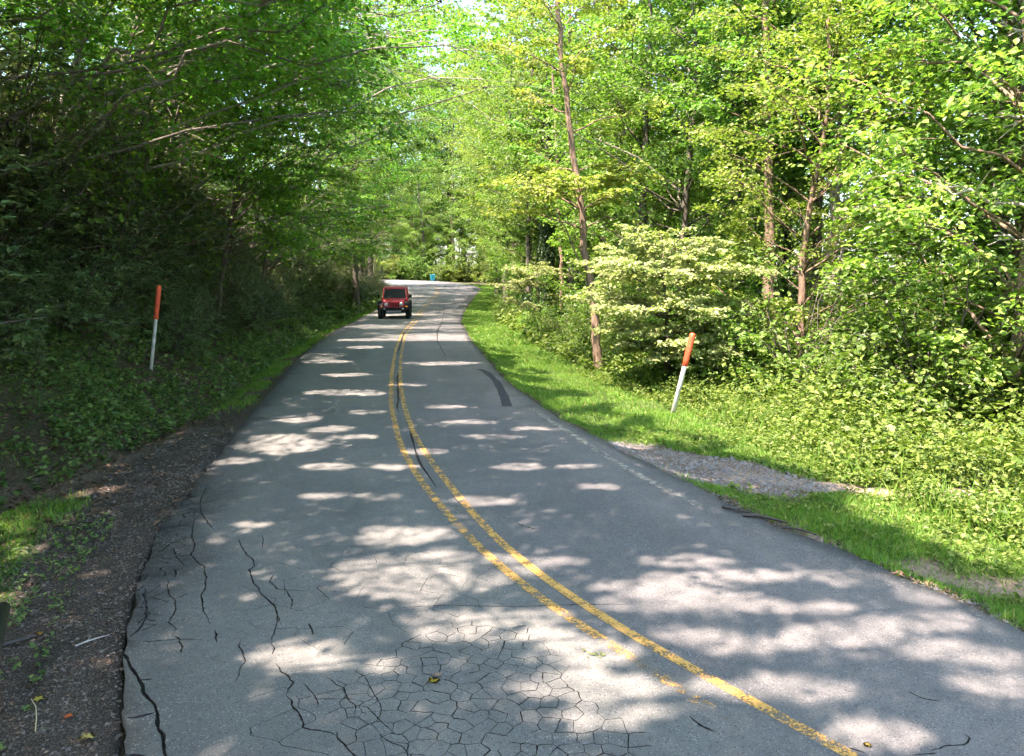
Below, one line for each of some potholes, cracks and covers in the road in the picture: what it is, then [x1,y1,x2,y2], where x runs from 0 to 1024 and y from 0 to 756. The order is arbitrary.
crack [914,733,971,755]
crack [232,535,648,756]
crack [123,488,218,756]
